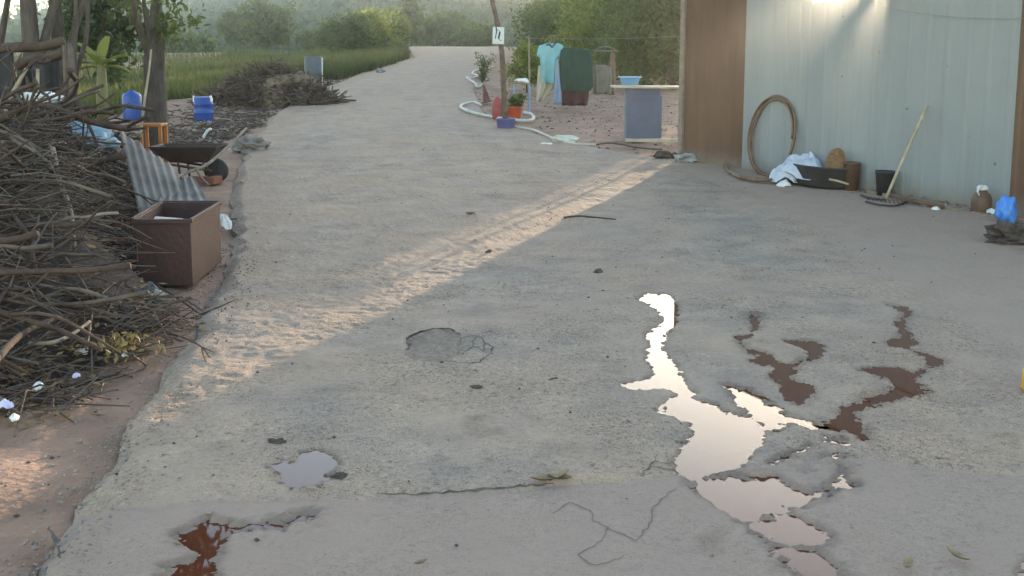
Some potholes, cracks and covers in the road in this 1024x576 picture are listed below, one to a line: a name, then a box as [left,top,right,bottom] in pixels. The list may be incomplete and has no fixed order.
pothole [403,328,463,361]
crack [383,459,678,565]
